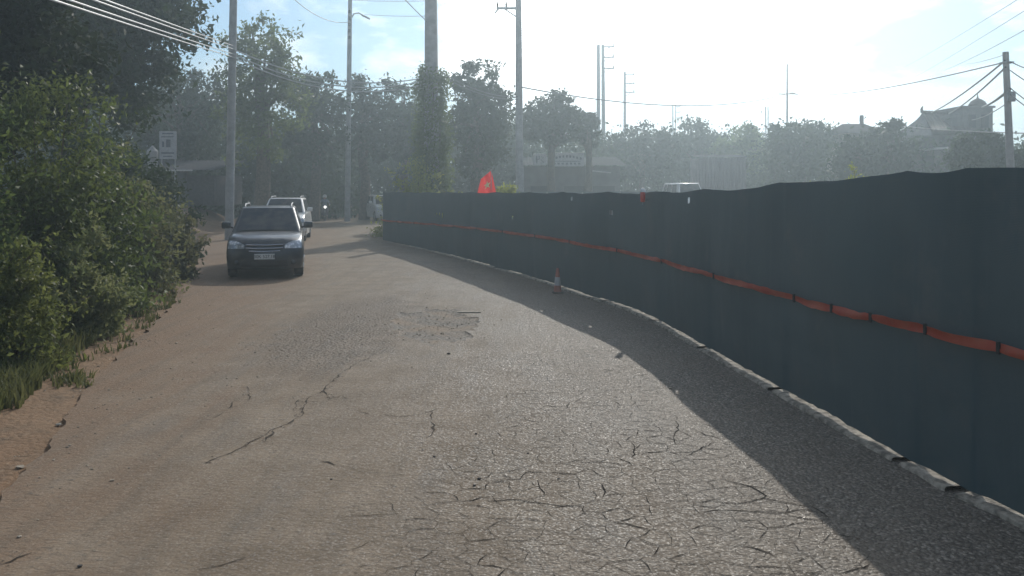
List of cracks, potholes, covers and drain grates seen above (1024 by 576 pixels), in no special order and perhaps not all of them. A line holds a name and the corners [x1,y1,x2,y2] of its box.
crack [206,358,368,463]
crack [362,409,437,438]
